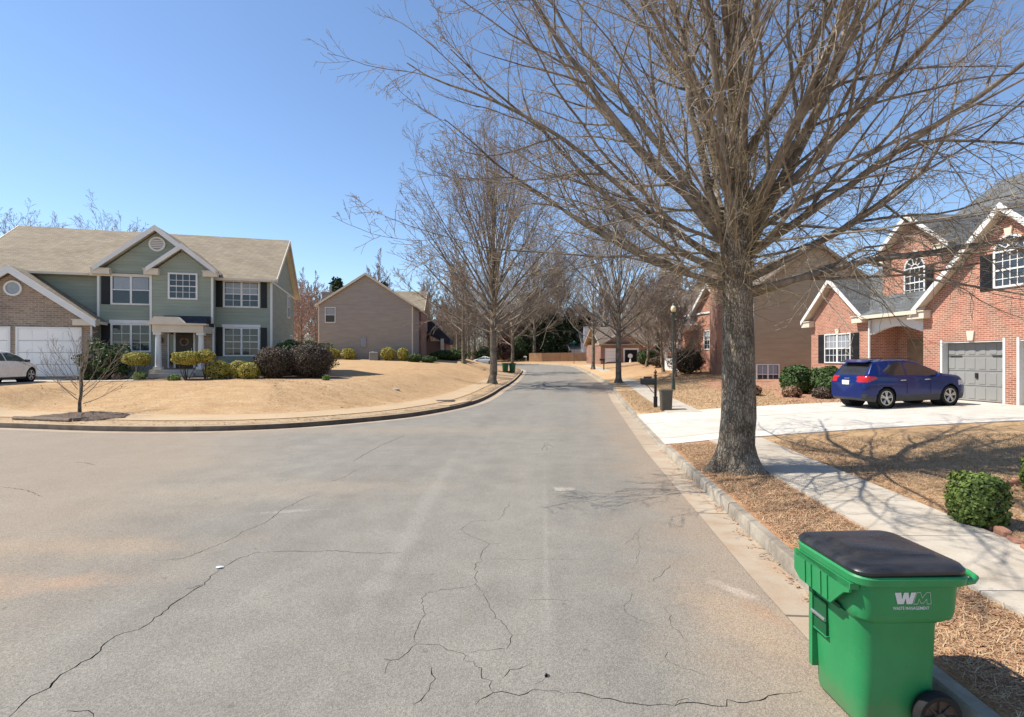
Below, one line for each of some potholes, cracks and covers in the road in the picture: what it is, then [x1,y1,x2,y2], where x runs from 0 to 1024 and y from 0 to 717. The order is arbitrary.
crack [168,438,398,560]
crack [384,505,800,707]
crack [9,550,355,717]
